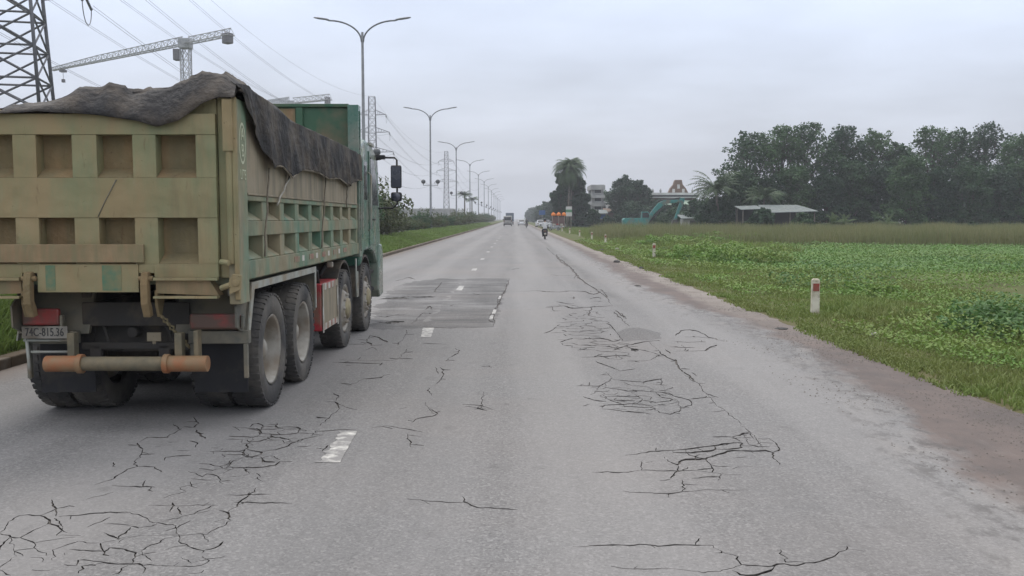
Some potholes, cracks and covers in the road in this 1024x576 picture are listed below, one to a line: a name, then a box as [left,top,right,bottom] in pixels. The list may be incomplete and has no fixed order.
crack [410,496,517,510]
crack [581,538,860,576]
crack [543,248,780,497]
crack [0,277,493,575]
